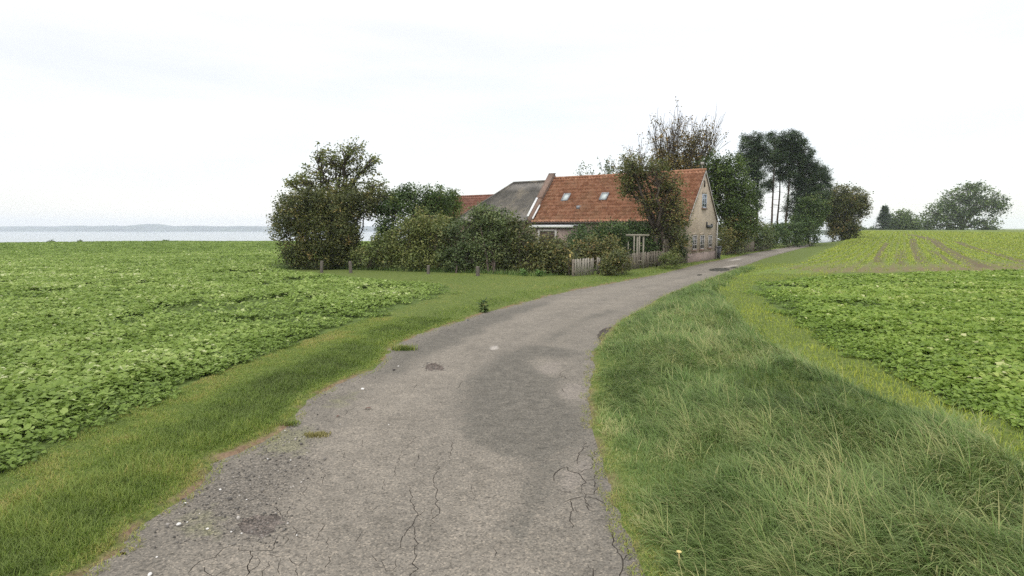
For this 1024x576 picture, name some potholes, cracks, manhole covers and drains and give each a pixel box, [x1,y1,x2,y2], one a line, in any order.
crack [188,470,332,576]
crack [609,523,629,576]
crack [553,441,610,528]
crack [356,436,453,575]
